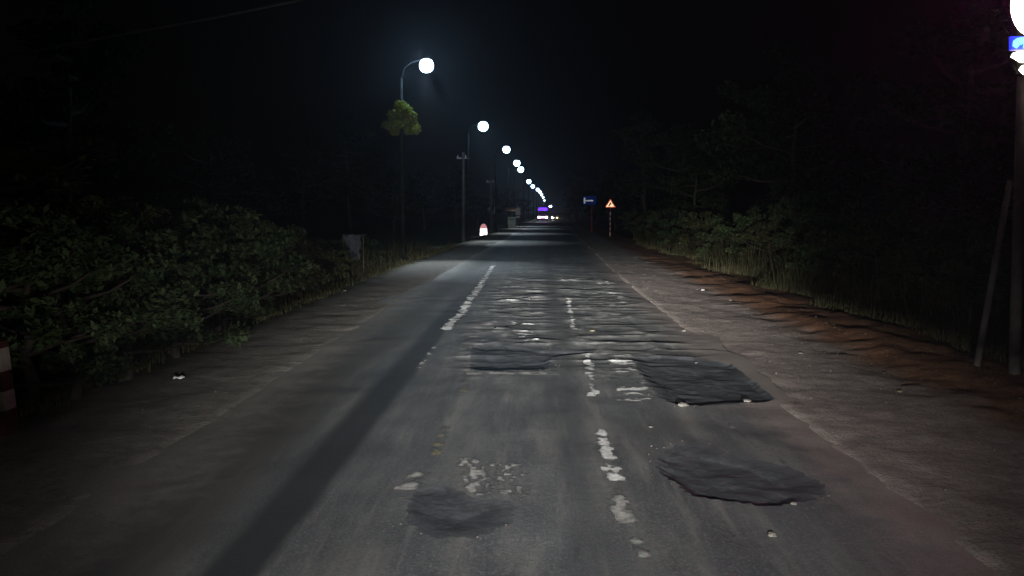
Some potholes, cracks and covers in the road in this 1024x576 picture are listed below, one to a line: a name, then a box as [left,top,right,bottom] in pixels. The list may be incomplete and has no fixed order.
crack [575,321,723,351]
crack [492,295,541,329]
crack [563,279,651,303]
